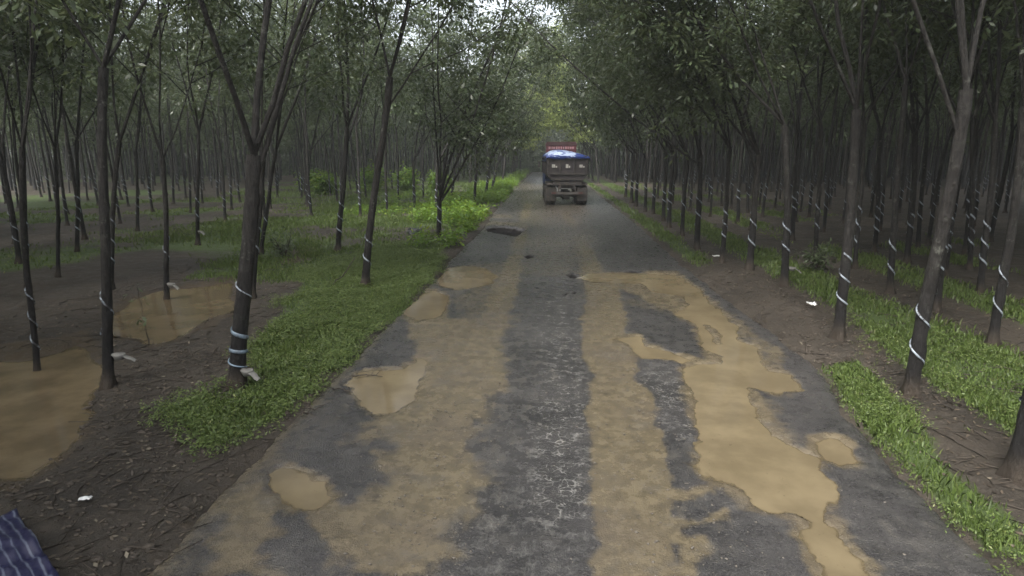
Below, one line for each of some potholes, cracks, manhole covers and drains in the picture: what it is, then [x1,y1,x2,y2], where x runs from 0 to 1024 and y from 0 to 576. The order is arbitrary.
pothole [262,460,341,512]
pothole [341,354,440,417]
pothole [435,264,499,290]
pothole [401,289,453,322]
pothole [578,272,877,576]
pothole [485,226,527,237]
